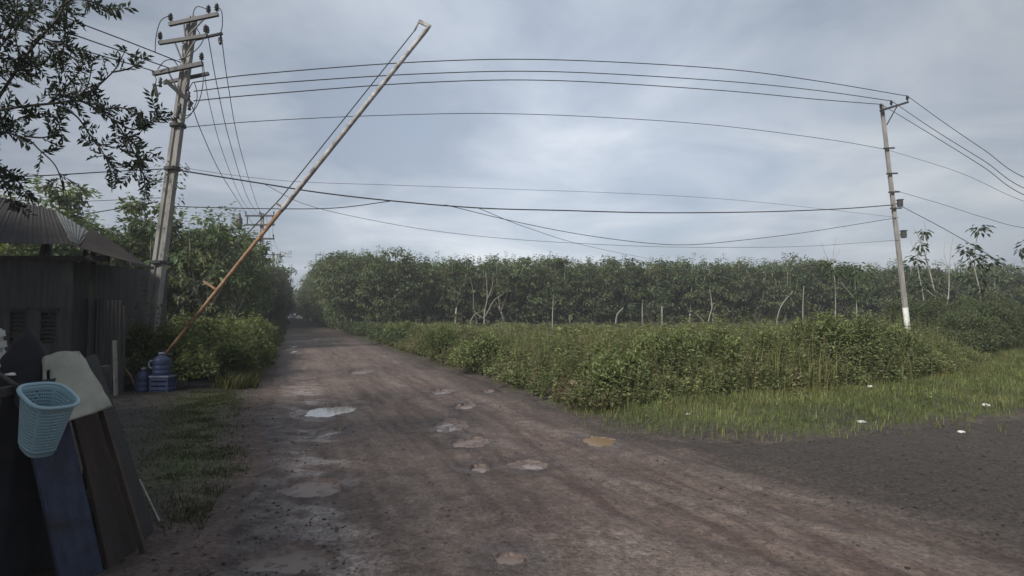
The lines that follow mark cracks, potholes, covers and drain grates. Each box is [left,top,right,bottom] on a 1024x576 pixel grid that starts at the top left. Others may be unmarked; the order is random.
pothole [582,436,616,447]
pothole [304,406,357,417]
pothole [470,464,489,473]
pothole [233,541,341,574]
pothole [506,459,548,470]
pothole [432,418,470,433]
pothole [276,477,343,498]
pothole [491,552,529,565]
pothole [450,437,490,448]
pothole [313,427,346,438]
